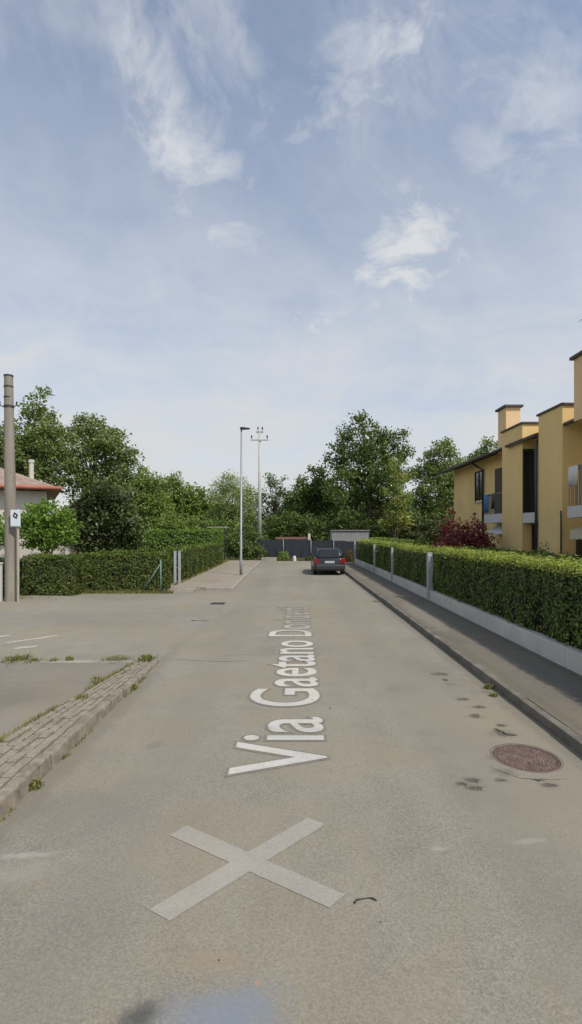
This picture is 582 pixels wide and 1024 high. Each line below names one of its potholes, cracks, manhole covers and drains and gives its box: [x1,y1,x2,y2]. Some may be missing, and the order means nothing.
manhole cover [490,744,564,773]
